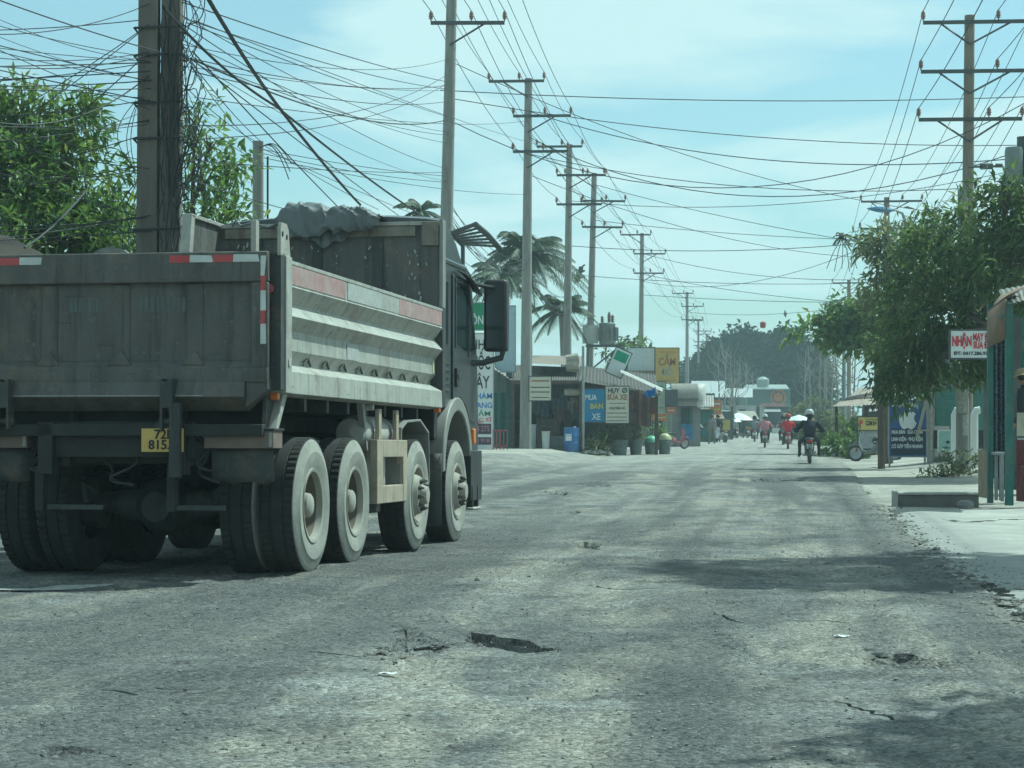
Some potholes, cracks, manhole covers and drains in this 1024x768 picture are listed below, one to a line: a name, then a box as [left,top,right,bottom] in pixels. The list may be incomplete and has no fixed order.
pothole [571,540,603,550]
crack [413,643,466,659]
crack [814,700,904,721]
pothole [465,632,559,654]
